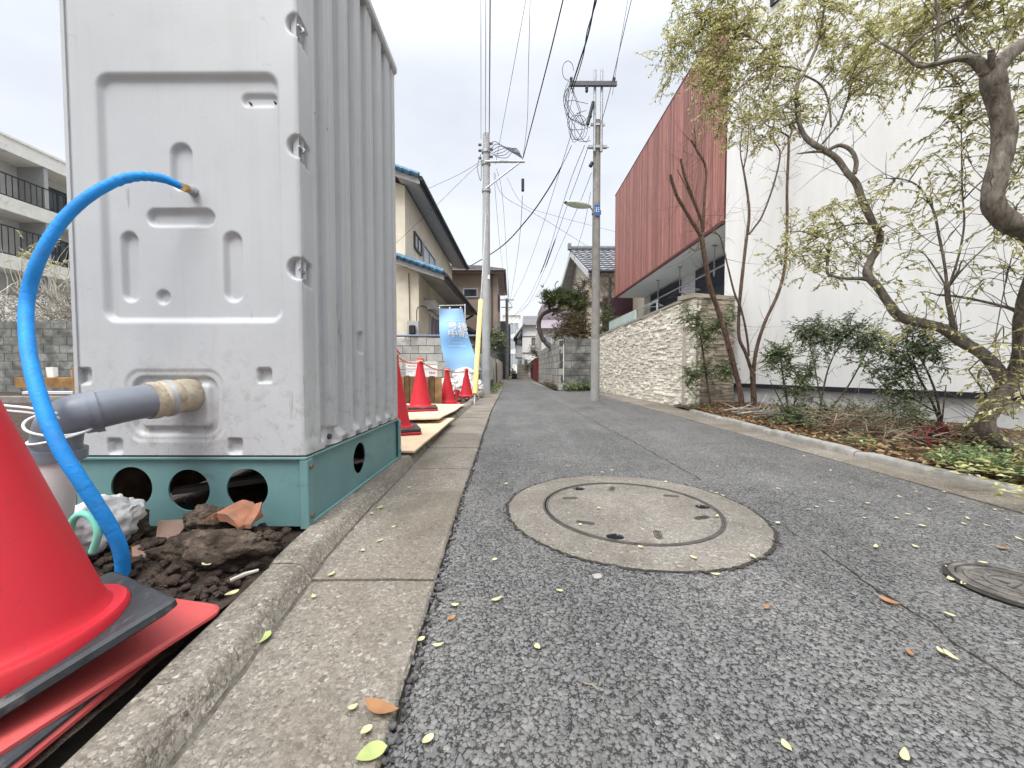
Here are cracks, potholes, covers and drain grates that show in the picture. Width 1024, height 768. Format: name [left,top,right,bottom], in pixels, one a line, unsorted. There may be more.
utility cover [941,562,1024,608]
manhole cover [505,476,780,574]
